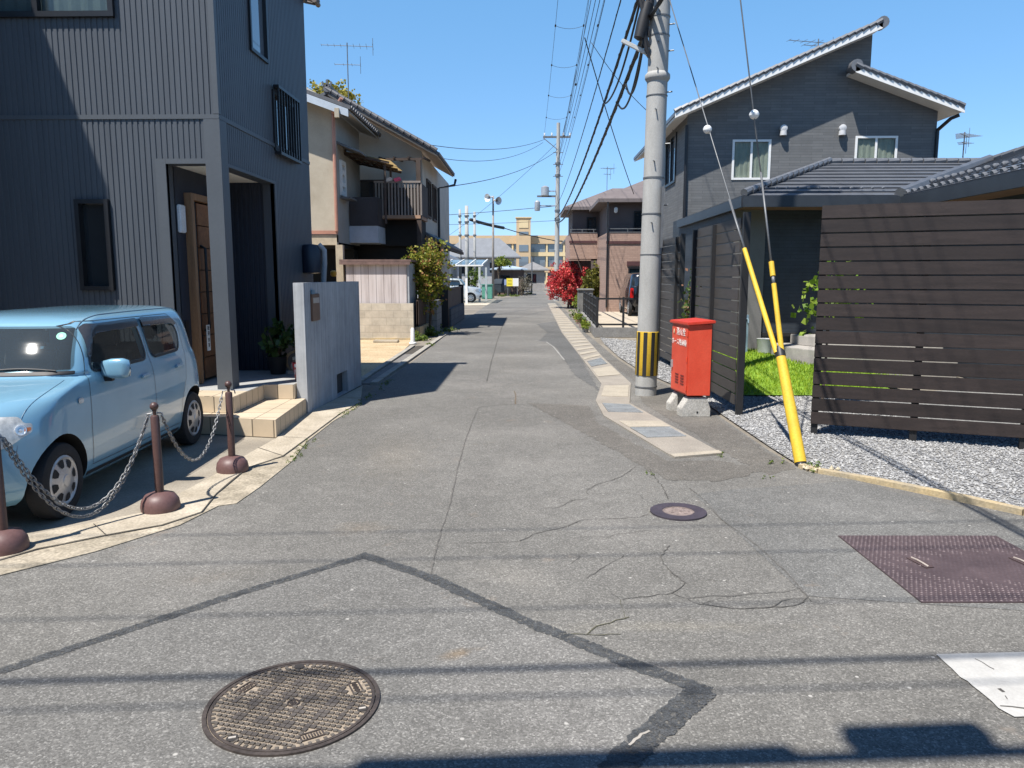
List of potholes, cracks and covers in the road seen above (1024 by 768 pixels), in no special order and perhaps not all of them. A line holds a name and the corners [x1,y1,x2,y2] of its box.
crack [459,467,669,543]
manhole cover [838,535,1024,603]
crack [611,545,843,609]
manhole cover [650,503,707,521]
manhole cover [201,660,380,757]
